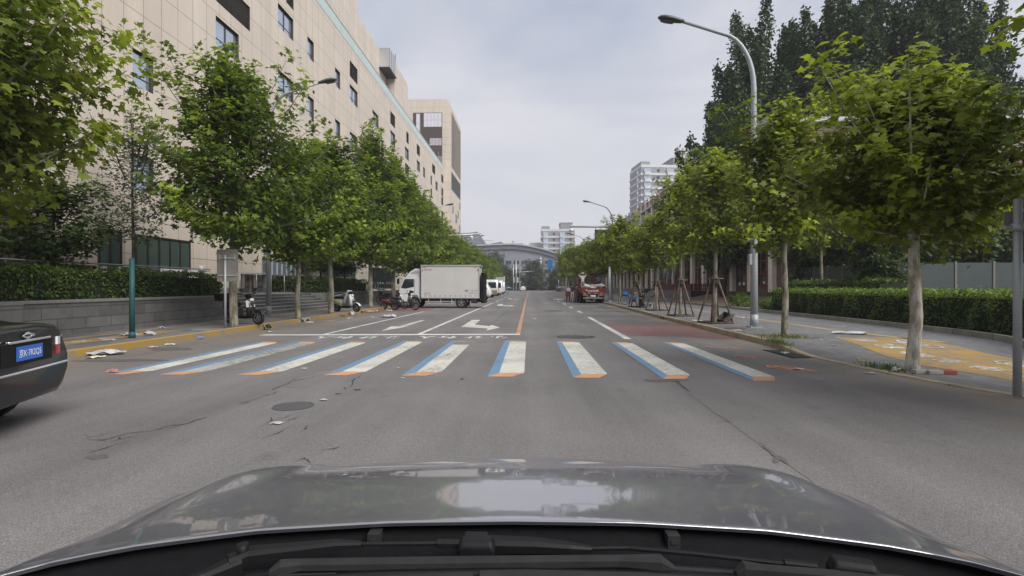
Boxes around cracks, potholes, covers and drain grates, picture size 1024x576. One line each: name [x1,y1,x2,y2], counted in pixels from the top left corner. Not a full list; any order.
crack [759,441,788,464]
manhole cover [272,401,314,410]
crack [85,417,205,451]
